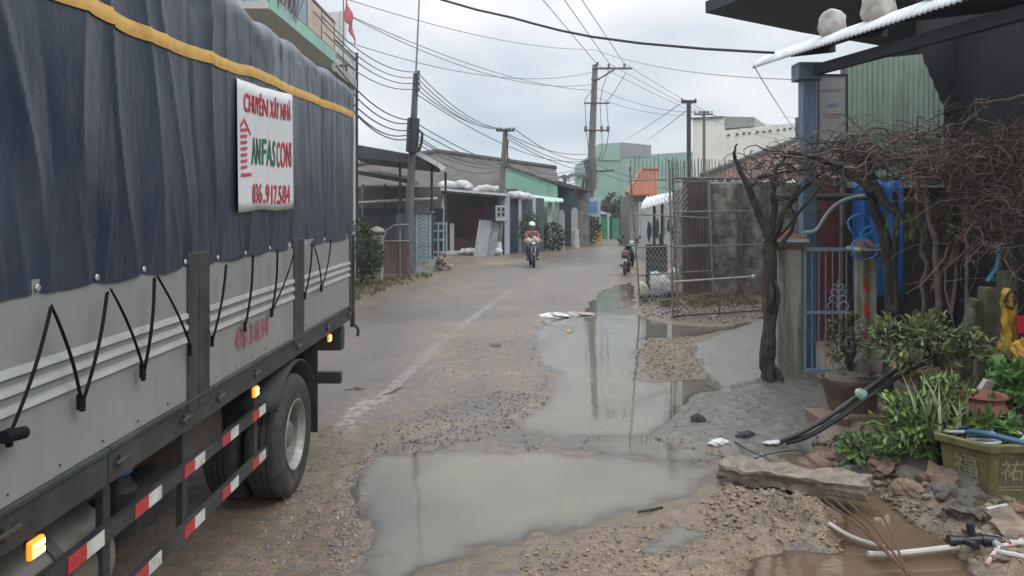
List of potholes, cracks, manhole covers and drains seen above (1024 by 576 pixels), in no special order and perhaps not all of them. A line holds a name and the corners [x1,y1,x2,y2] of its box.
pothole [315,443,789,576]
pothole [465,280,762,449]
